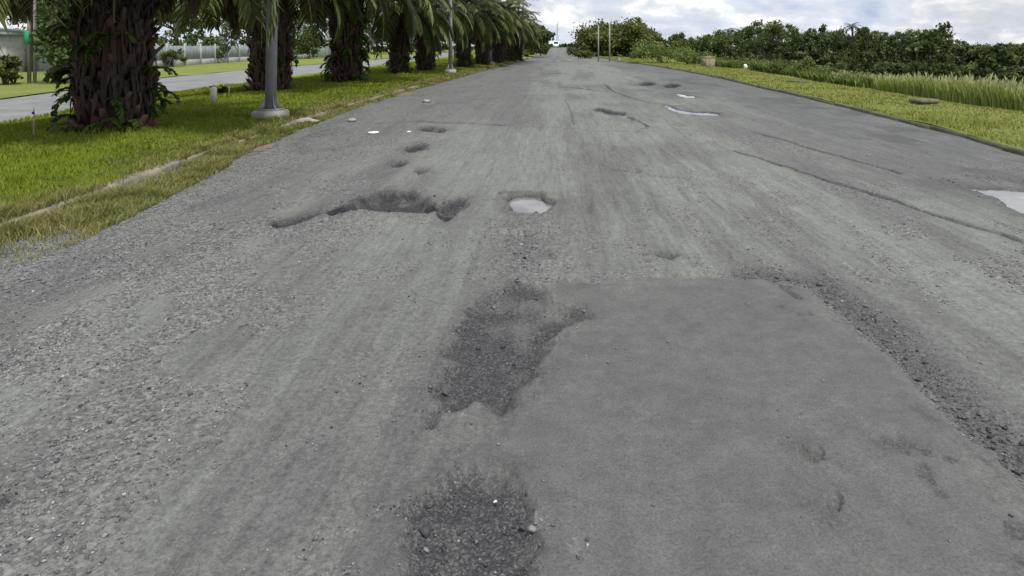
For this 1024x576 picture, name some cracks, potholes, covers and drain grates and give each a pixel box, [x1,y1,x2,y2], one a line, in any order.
crack [733,132,1024,244]
pothole [792,441,826,463]
pothole [421,279,596,431]
pothole [402,142,430,153]
crack [524,73,652,133]
pothole [323,187,438,216]
pothole [825,489,844,518]
pothole [389,159,409,168]
pothole [500,191,557,213]
pothole [964,186,1024,214]
pothole [434,197,470,223]
pothole [591,107,628,116]
